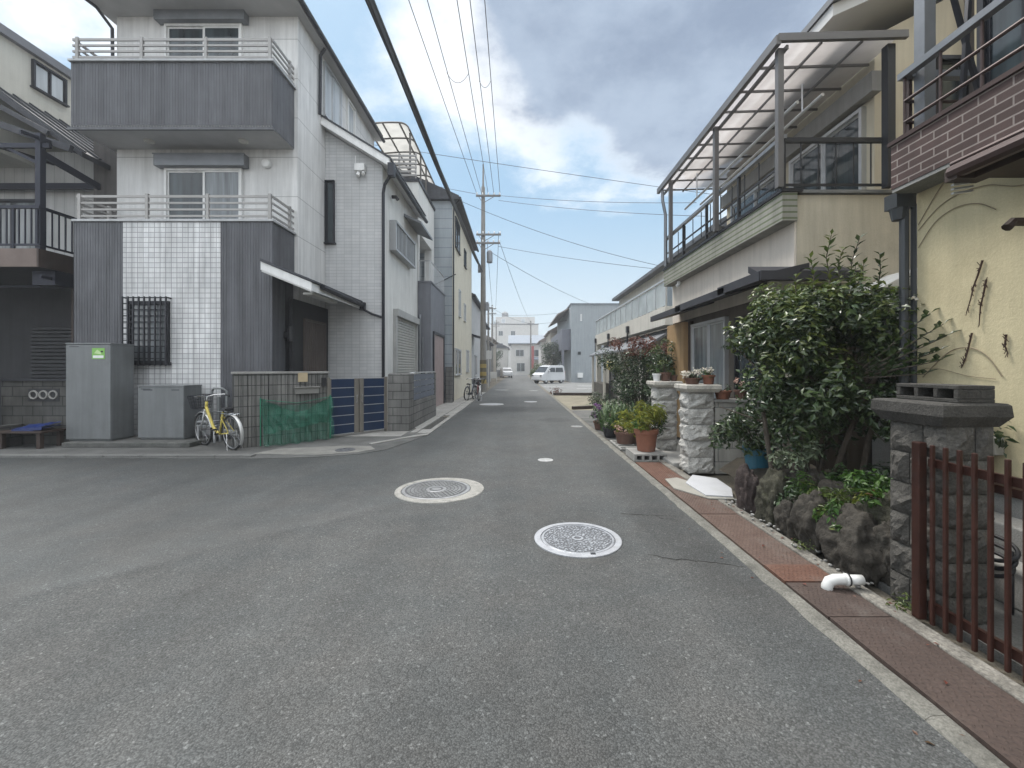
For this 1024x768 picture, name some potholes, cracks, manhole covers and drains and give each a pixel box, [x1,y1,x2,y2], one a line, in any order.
crack [620,513,678,521]
manhole cover [394,478,484,504]
crack [648,554,748,569]
manhole cover [534,522,622,558]
